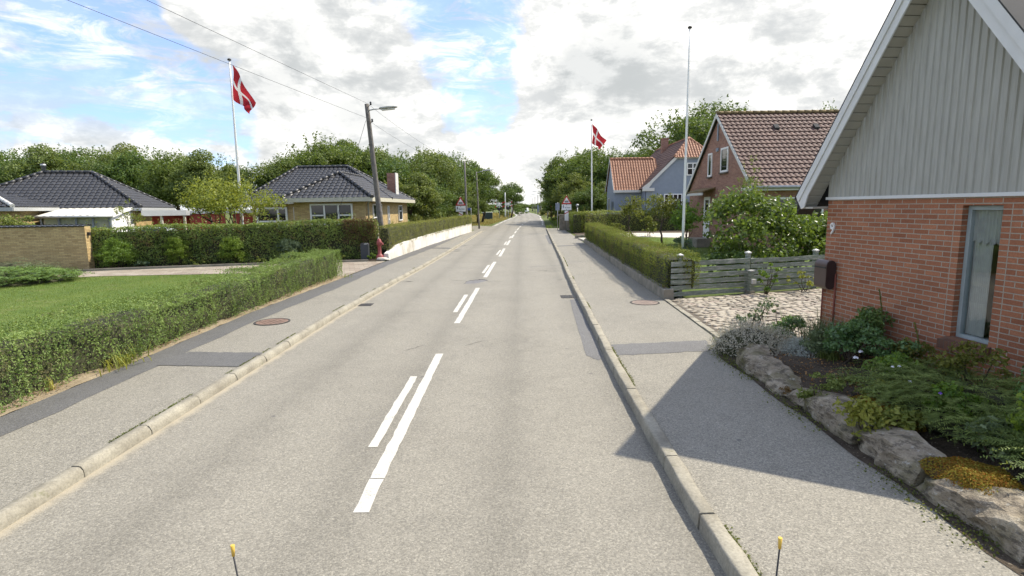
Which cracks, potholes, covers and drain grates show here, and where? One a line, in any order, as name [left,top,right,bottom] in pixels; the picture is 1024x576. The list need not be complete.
manhole cover [253,318,290,326]
